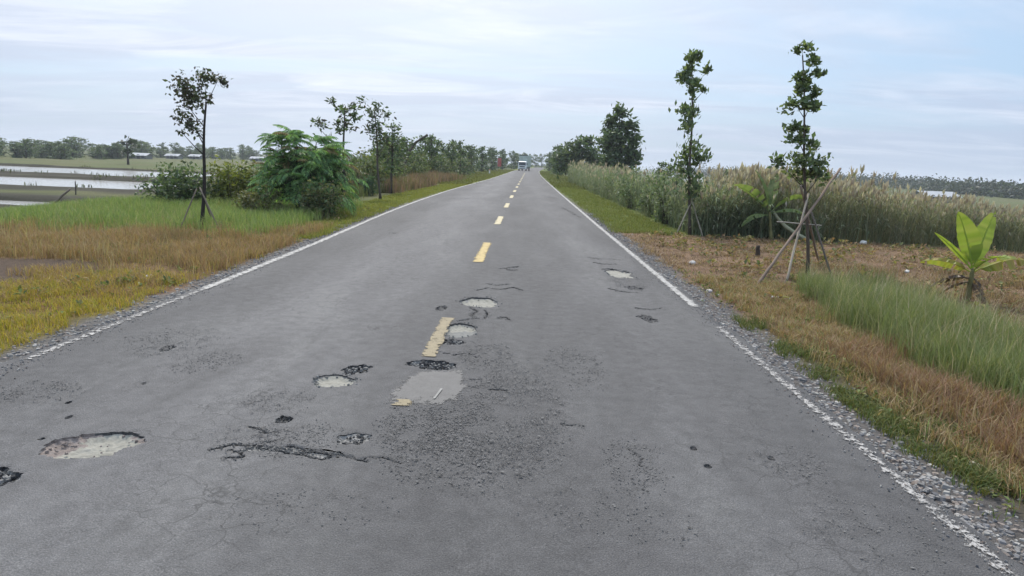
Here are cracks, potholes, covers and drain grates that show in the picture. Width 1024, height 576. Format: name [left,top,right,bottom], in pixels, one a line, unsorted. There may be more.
pothole [441,322,478,338]
pothole [38,432,148,459]
pothole [405,360,456,370]
pothole [0,466,23,487]
pothole [604,268,637,278]
crack [207,426,401,464]
pothole [337,433,372,445]
pothole [340,364,373,376]
pothole [312,372,361,388]
crack [460,266,522,323]
pothole [455,296,502,308]
